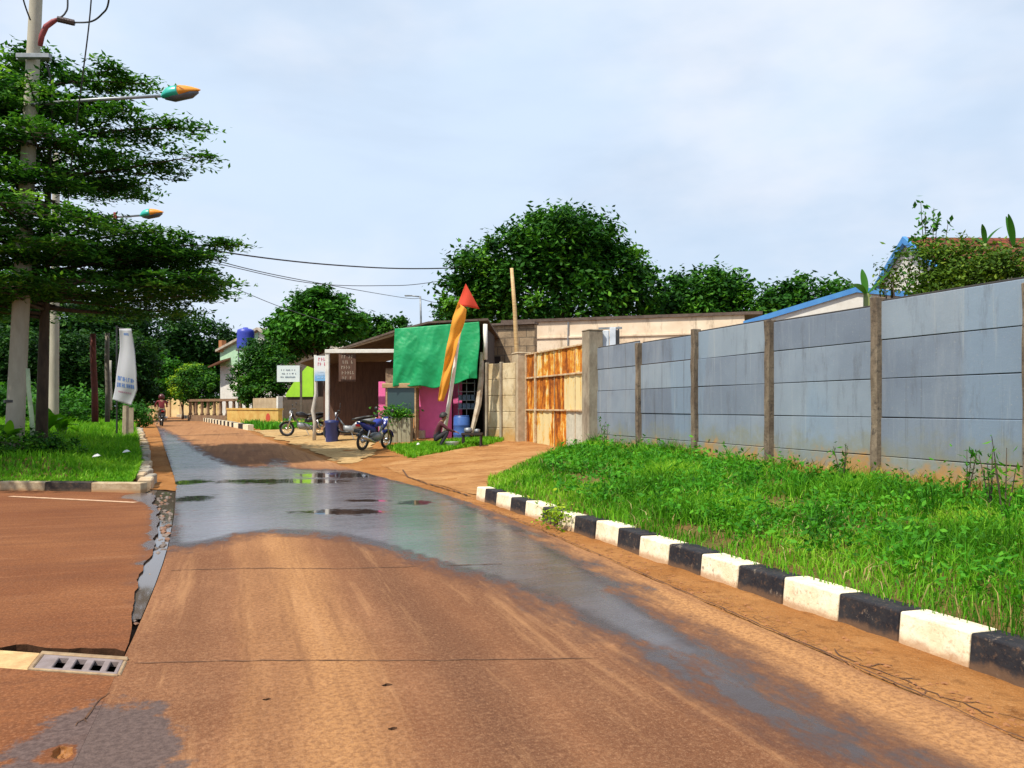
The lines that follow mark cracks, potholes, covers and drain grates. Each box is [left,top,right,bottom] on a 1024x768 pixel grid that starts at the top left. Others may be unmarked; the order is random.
drain grate [28,651,128,677]
crack [75,692,110,726]
pothole [50,746,73,759]
